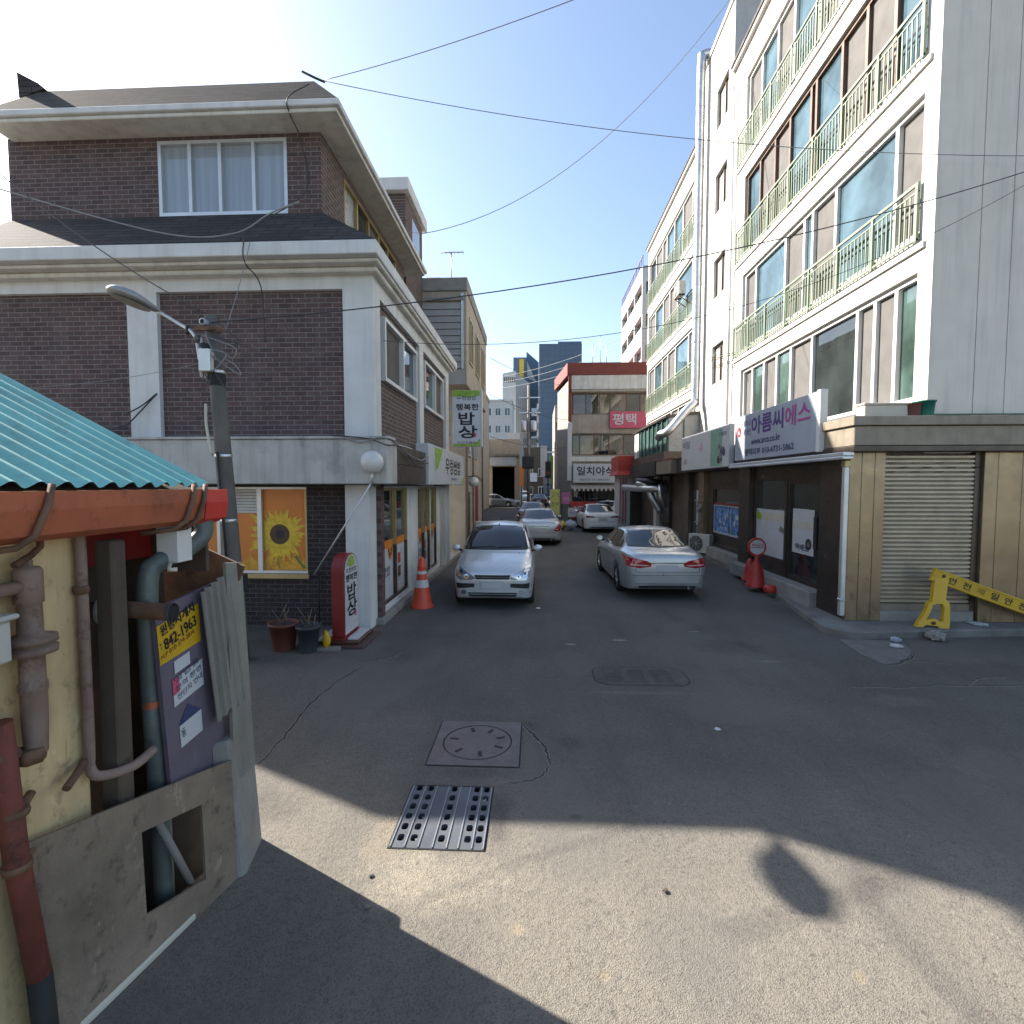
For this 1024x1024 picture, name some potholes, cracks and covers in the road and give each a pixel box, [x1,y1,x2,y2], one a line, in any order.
manhole cover [424,720,523,768]
crack [364,652,404,663]
drain grate [387,785,494,852]
crack [508,724,552,785]
